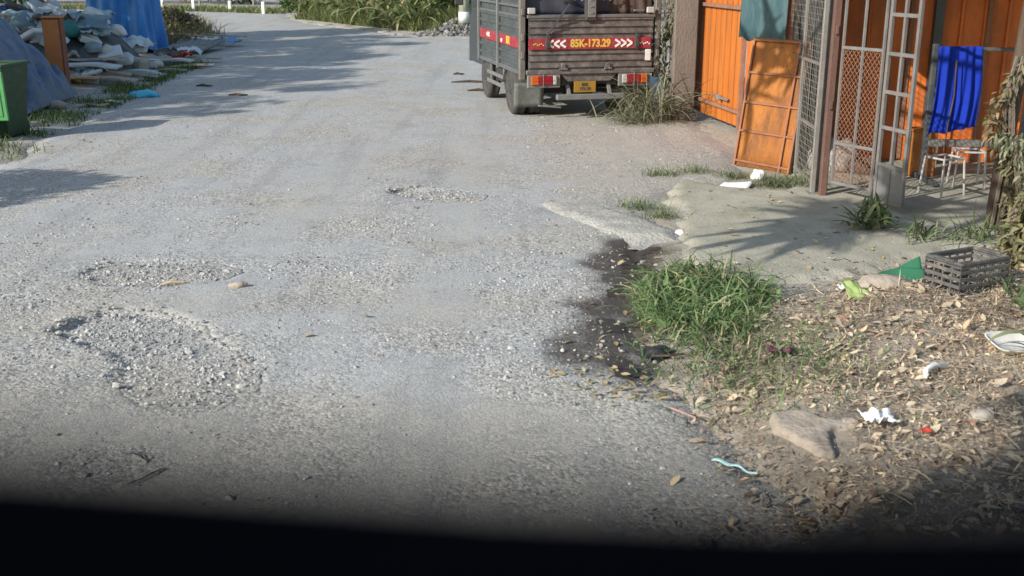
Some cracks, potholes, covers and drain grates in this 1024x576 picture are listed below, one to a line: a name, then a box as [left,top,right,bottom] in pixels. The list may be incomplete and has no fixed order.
pothole [41,304,267,413]
pothole [77,260,245,287]
pothole [386,185,488,202]
